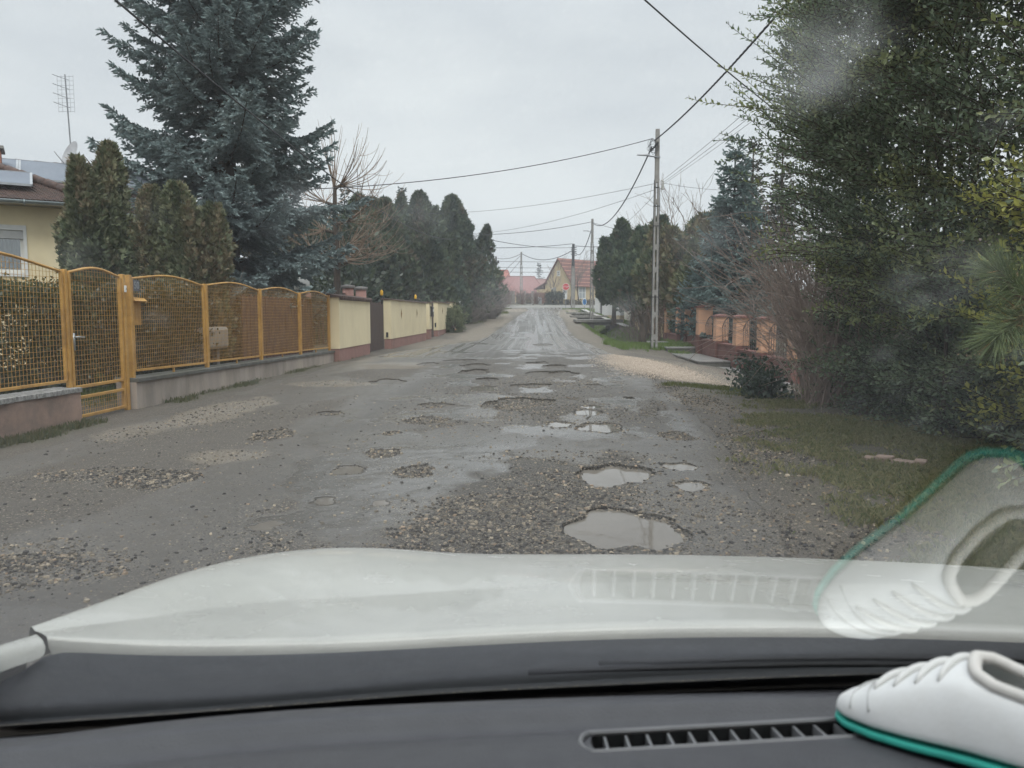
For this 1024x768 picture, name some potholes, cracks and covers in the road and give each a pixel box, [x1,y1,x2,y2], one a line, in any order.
pothole [482,398,554,410]
pothole [109,472,198,489]
pothole [662,463,698,471]
pothole [674,481,710,492]
pothole [563,509,693,551]
pothole [332,465,364,475]
pothole [577,465,652,488]
pothole [396,465,429,477]
pothole [310,497,334,505]
pothole [577,423,622,433]
